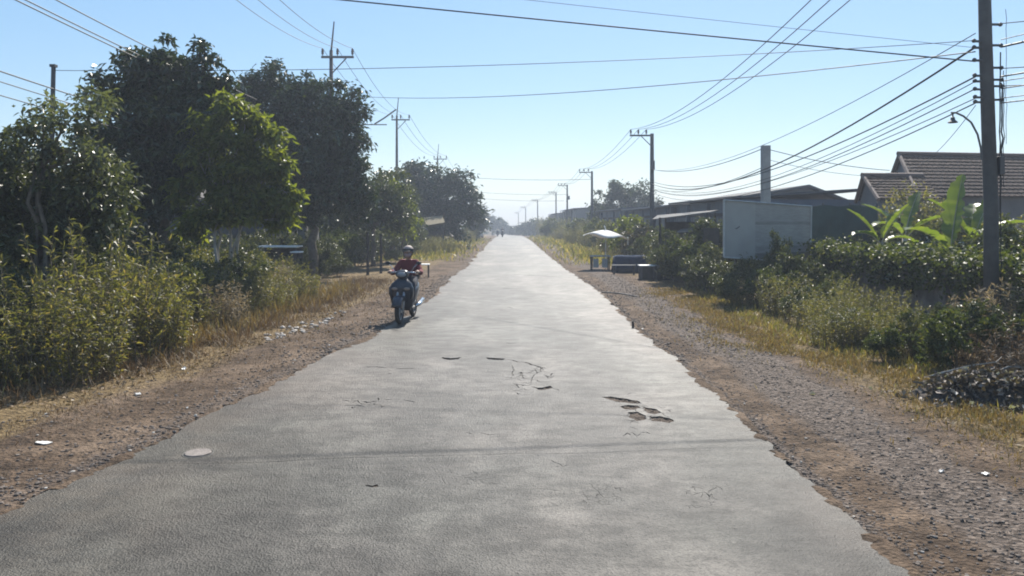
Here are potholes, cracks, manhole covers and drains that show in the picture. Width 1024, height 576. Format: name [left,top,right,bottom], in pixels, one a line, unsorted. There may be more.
pothole [621,403,674,423]
crack [508,367,558,394]
crack [580,483,624,505]
pothole [603,392,640,404]
manhole cover [182,448,214,458]
